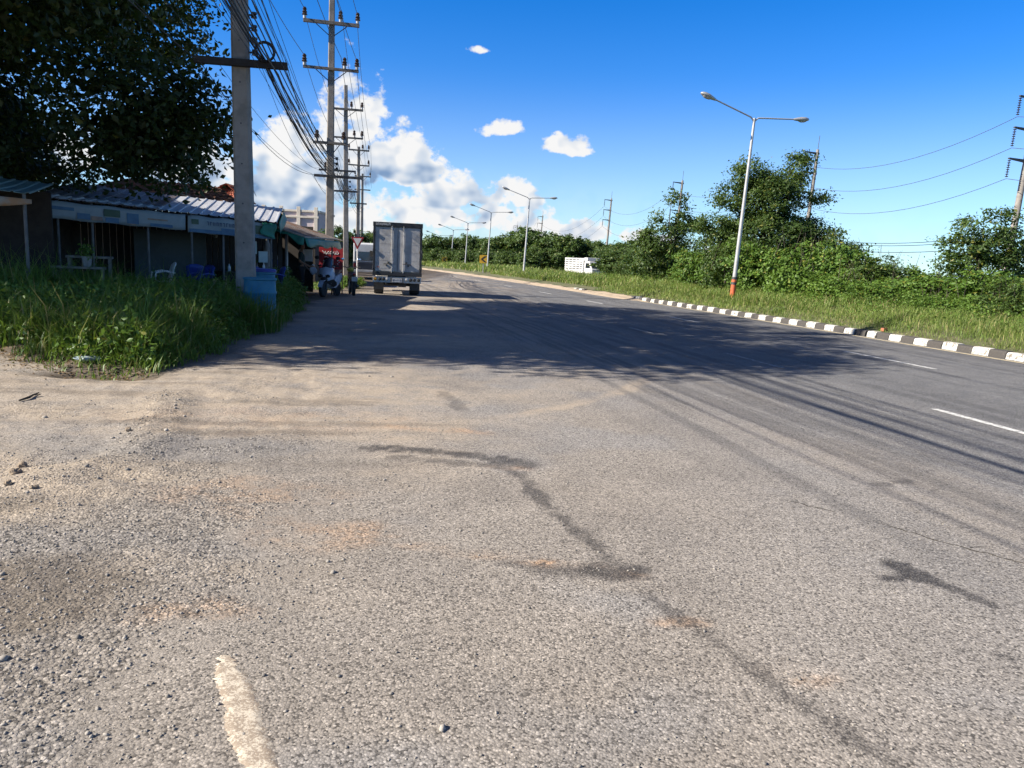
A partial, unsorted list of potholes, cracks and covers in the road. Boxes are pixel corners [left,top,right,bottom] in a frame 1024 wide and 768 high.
crack [879,523,1023,563]
